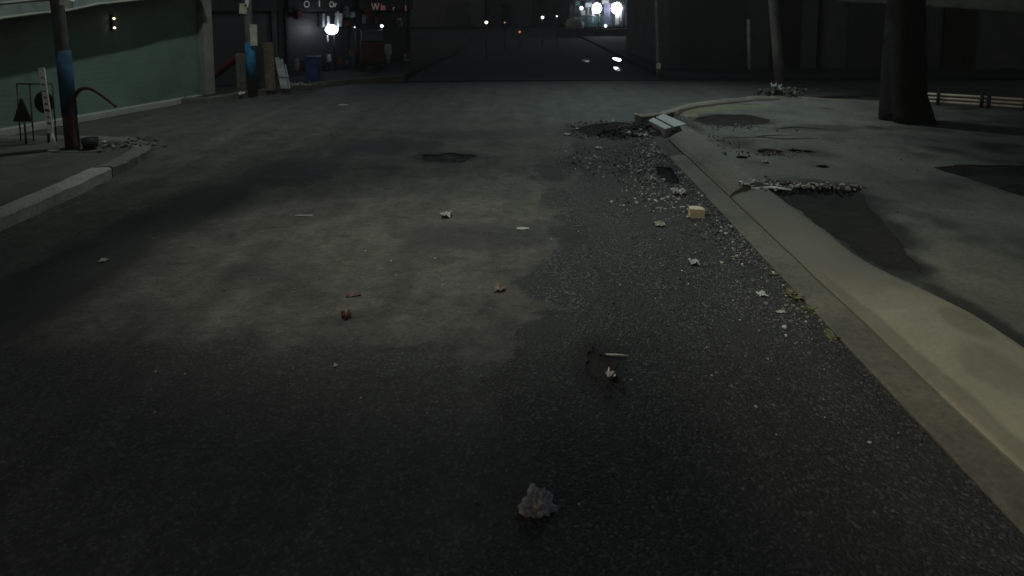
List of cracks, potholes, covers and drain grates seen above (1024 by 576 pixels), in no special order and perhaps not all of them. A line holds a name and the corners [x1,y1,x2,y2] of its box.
pothole [422,153,476,163]
pothole [575,122,644,140]
pothole [585,346,626,399]
pothole [656,167,680,185]
